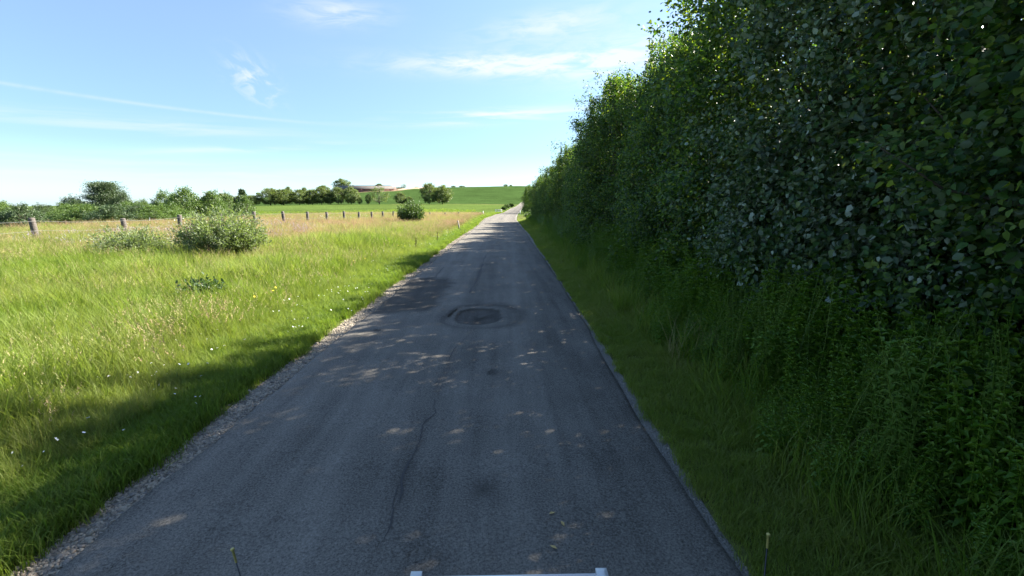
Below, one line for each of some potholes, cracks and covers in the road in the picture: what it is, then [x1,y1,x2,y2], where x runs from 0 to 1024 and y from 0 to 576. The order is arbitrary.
crack [383,339,464,543]
pothole [440,304,522,328]
